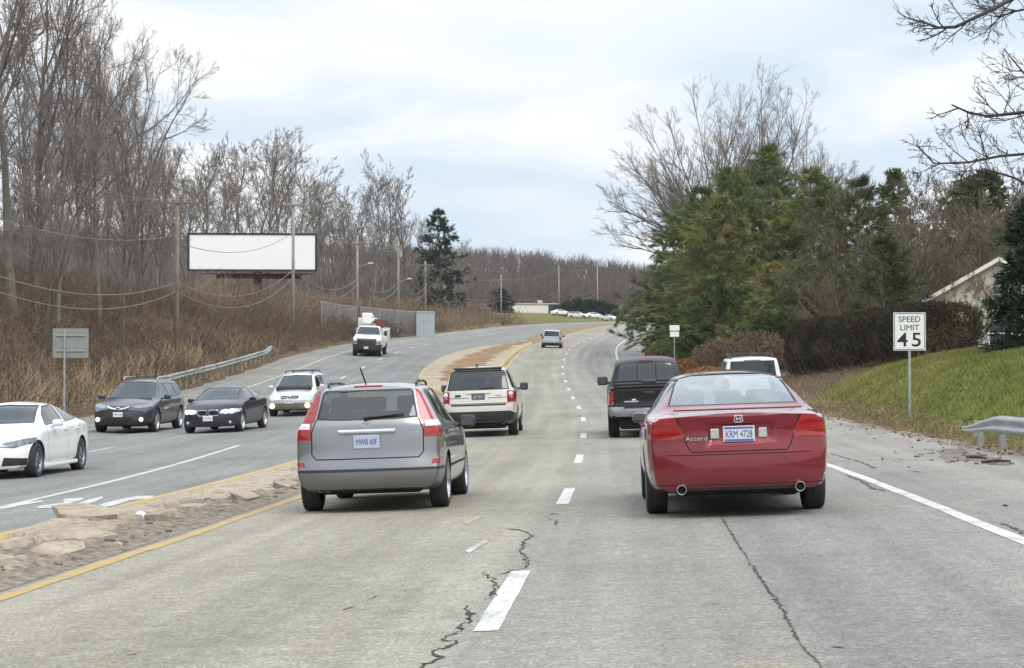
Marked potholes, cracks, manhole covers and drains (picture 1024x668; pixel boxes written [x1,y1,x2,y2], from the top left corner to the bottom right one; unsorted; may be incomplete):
pothole [894,449,1014,465]
crack [420,528,534,668]
crack [831,453,919,492]
